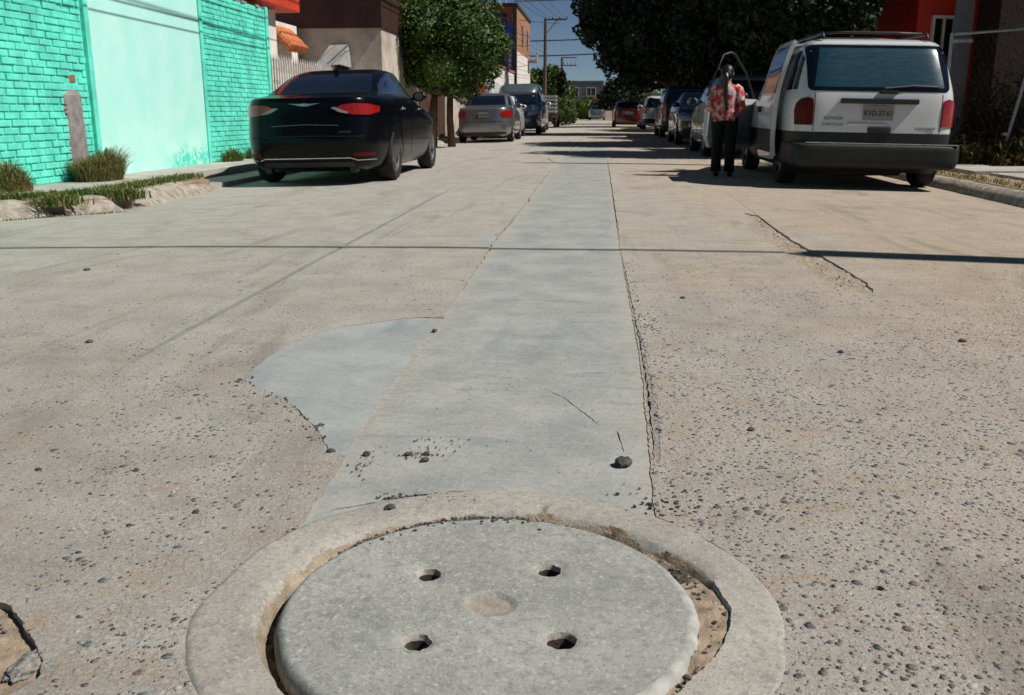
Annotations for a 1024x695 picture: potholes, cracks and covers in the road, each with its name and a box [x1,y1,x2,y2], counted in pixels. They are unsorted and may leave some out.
crack [745,214,873,293]
manhole cover [185,490,785,695]
crack [559,273,661,463]
pothole [0,609,43,695]
